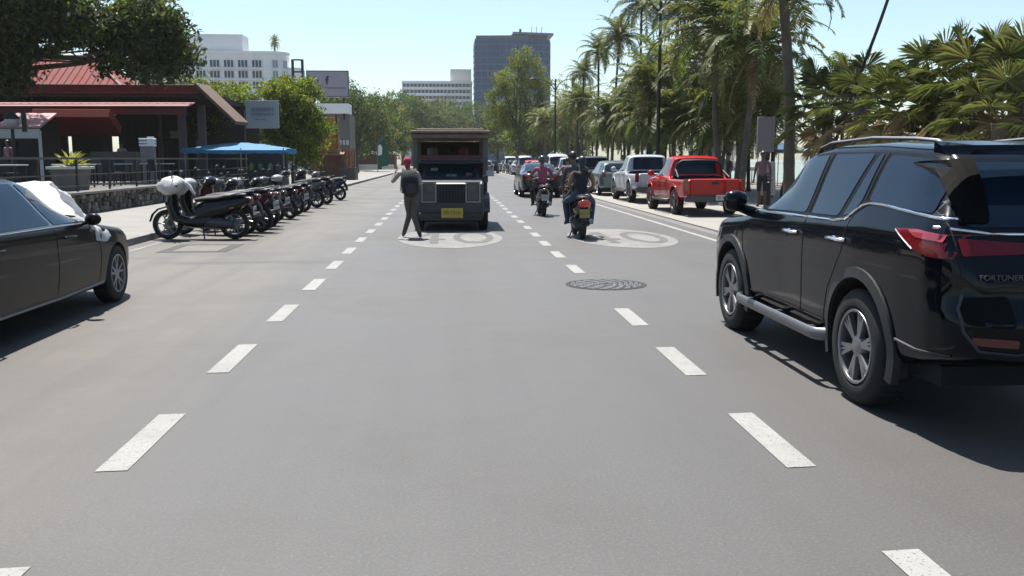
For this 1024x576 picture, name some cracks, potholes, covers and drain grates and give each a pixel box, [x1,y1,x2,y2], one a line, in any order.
manhole cover [566,279,647,290]
